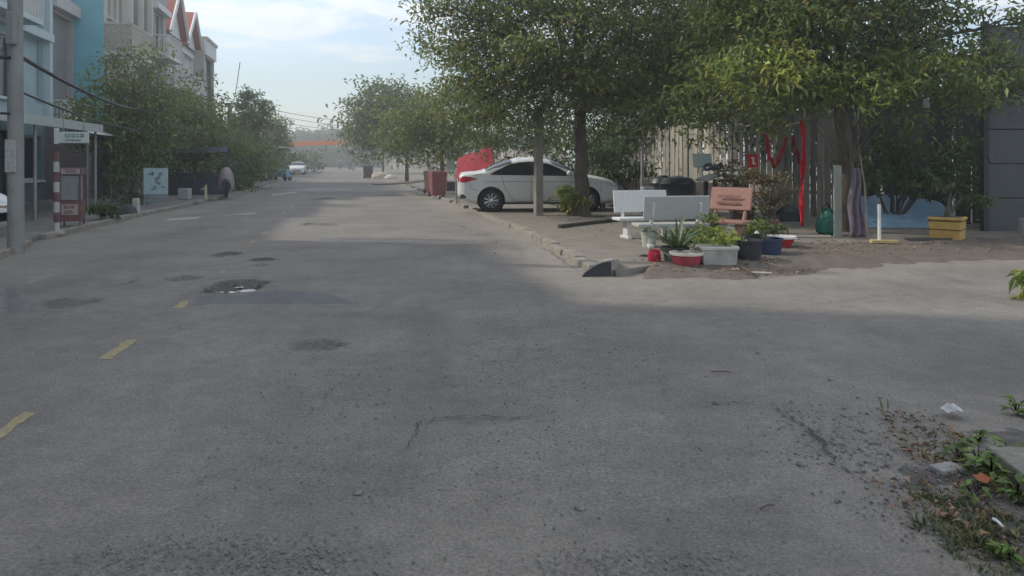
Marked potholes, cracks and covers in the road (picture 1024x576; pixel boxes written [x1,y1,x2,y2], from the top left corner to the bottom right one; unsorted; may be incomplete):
pothole [179,278,283,296]
pothole [203,251,247,259]
pothole [155,274,207,283]
pothole [30,295,111,312]
crack [393,410,556,456]
pothole [273,337,364,353]
